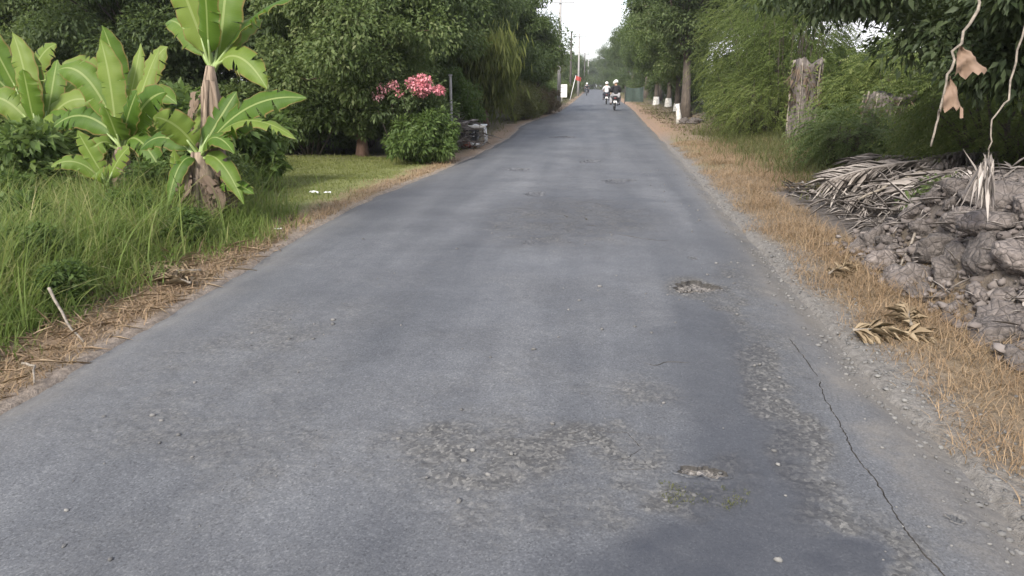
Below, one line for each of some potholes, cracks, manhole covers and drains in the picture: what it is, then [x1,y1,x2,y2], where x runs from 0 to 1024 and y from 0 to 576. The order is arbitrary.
crack [782,337,956,576]
pothole [668,279,728,295]
pothole [672,464,733,481]
